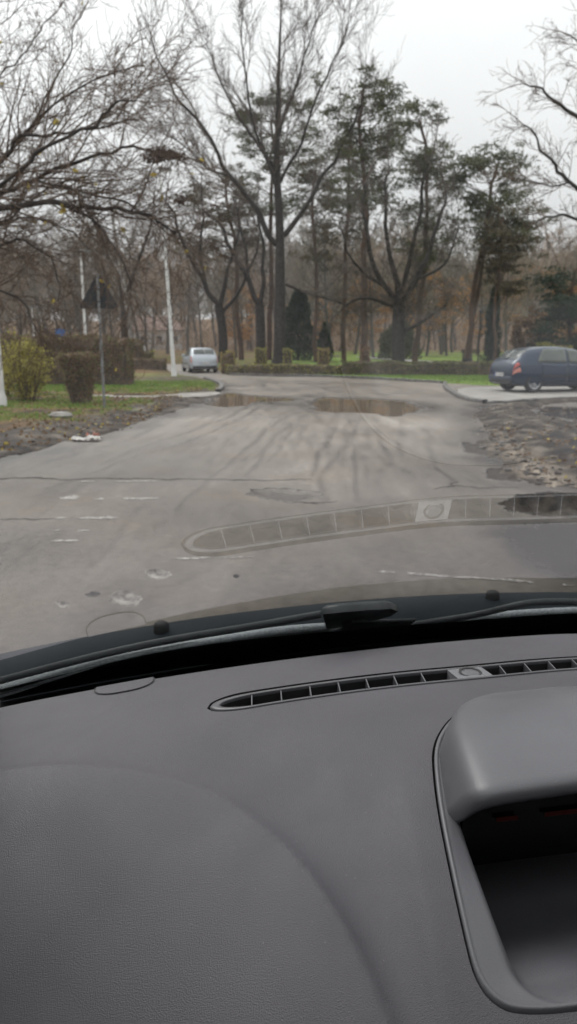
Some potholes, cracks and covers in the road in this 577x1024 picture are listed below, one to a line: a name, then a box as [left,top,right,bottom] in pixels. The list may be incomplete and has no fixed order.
pothole [303,397,428,417]
pothole [496,490,577,519]
pothole [199,392,305,407]
